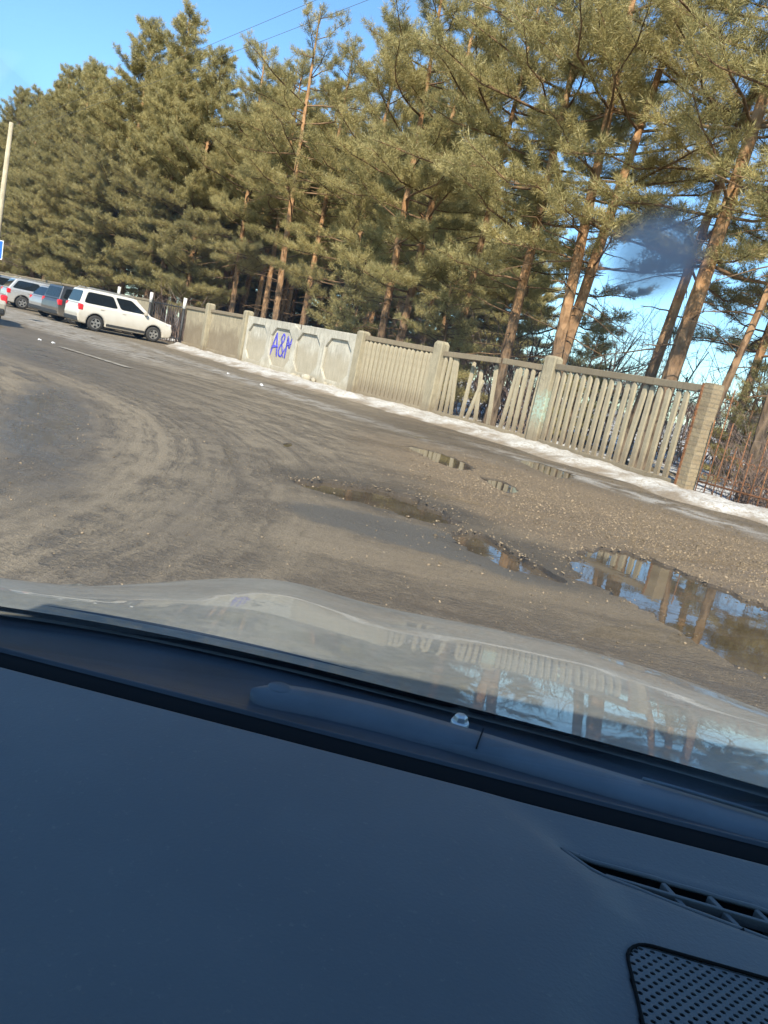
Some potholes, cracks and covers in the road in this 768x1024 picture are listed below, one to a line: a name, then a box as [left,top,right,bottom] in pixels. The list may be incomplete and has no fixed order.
pothole [451,530,567,583]
pothole [559,546,768,679]
pothole [290,478,463,525]
